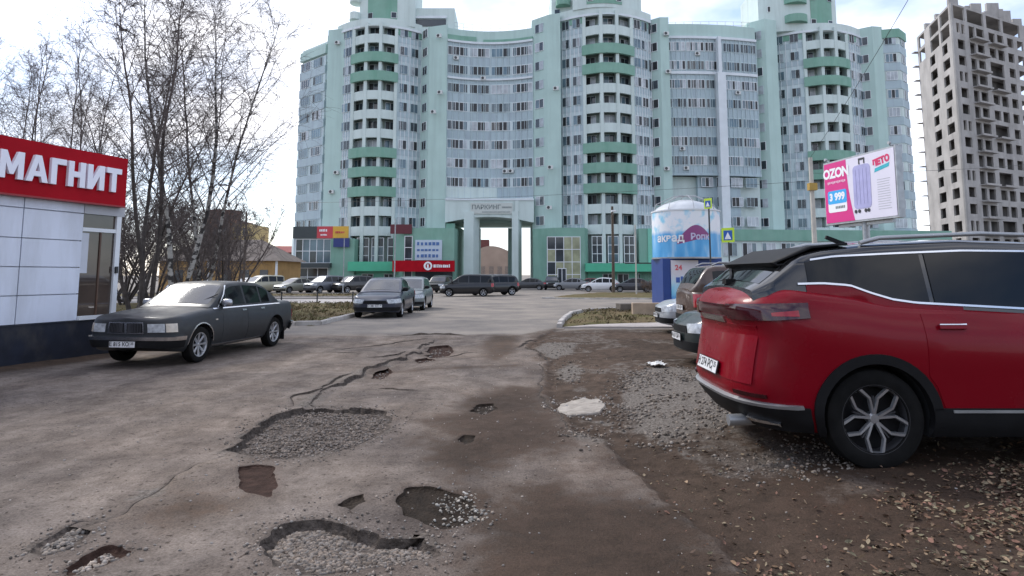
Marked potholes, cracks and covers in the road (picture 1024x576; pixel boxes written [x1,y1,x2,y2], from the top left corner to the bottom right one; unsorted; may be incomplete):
crack [69,453,250,530]
pothole [449,433,483,447]
pothole [244,516,455,576]
crack [278,333,482,406]
pothole [15,516,105,564]
pothole [217,407,400,463]
pothole [384,483,492,535]
pothole [364,365,398,380]
pothole [420,345,457,359]
pothole [47,540,147,576]
pothole [325,491,377,515]
pothole [464,402,505,417]
